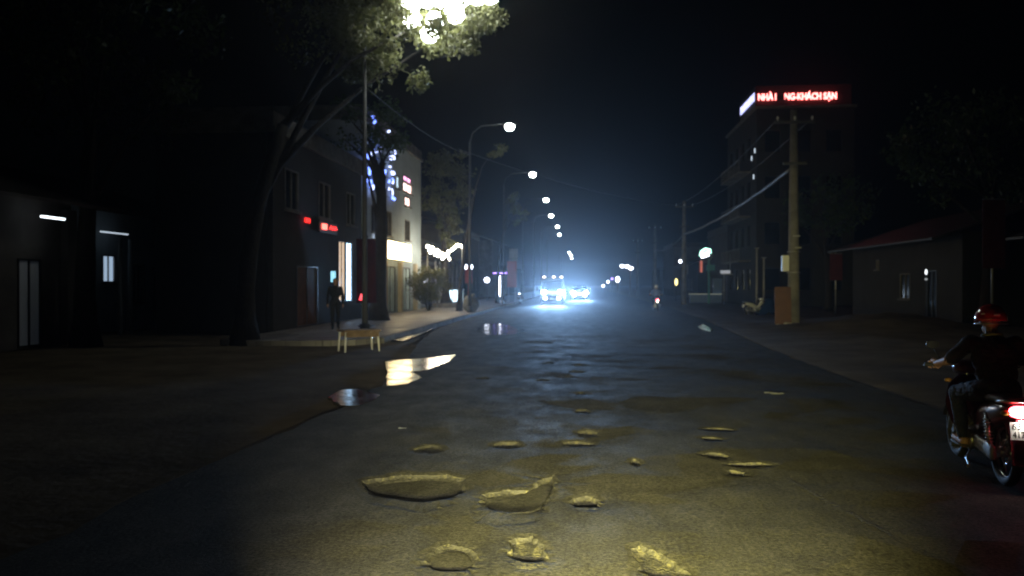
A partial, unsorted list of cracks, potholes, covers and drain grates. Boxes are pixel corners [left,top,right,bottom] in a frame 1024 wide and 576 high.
pothole [420,544,480,576]
pothole [506,536,550,570]
pothole [570,496,600,510]
pothole [476,477,558,526]
pothole [630,546,692,576]
pothole [413,445,443,454]
pothole [361,474,467,512]
